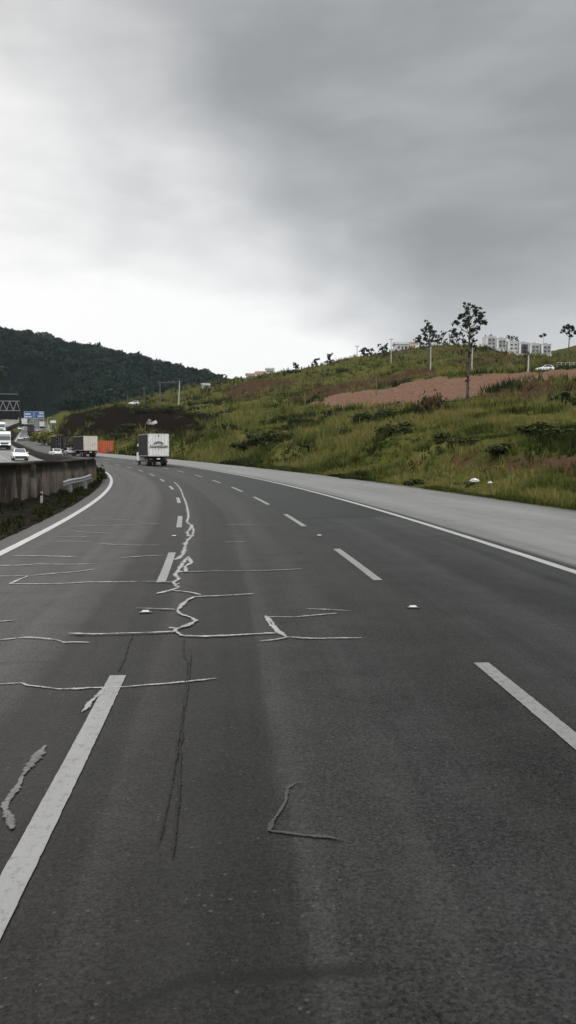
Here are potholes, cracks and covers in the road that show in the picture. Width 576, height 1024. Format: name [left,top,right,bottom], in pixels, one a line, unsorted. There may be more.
crack [0,482,362,859]
